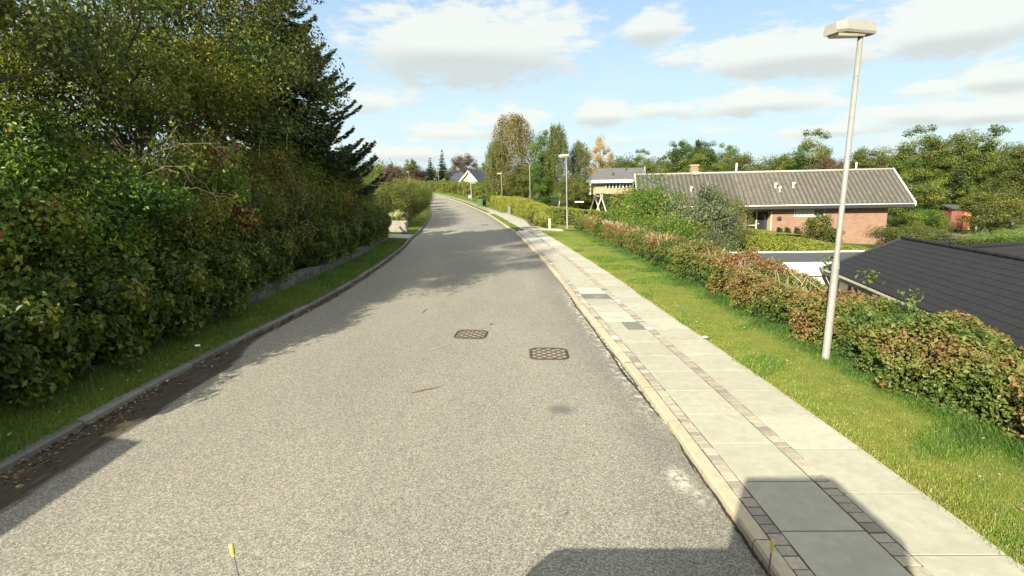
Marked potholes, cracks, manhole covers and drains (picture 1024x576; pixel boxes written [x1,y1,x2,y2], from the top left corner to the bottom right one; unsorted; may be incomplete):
manhole cover [454,330,488,339]
manhole cover [529,348,569,360]
